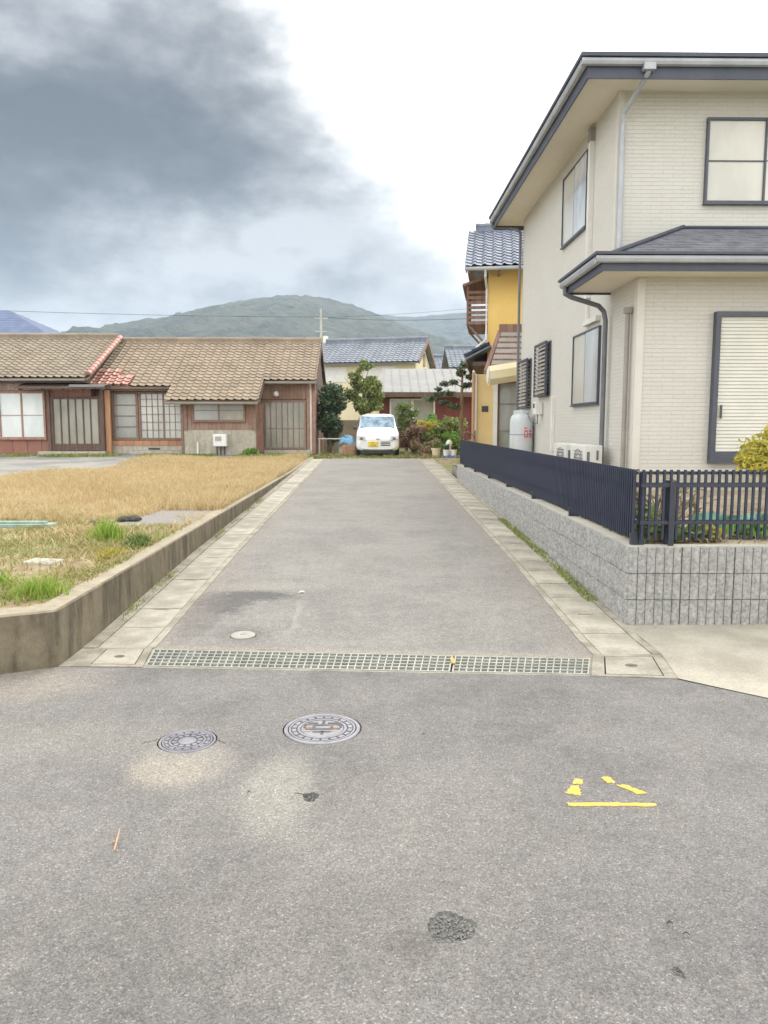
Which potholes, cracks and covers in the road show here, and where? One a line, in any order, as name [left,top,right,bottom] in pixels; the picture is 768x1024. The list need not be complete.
drain grate [452,655,591,675]
manhole cover [158,729,216,753]
manhole cover [284,714,361,745]
manhole cover [225,630,261,641]
drain grate [145,649,453,672]
pothole [303,792,320,802]
pothole [426,911,477,944]
